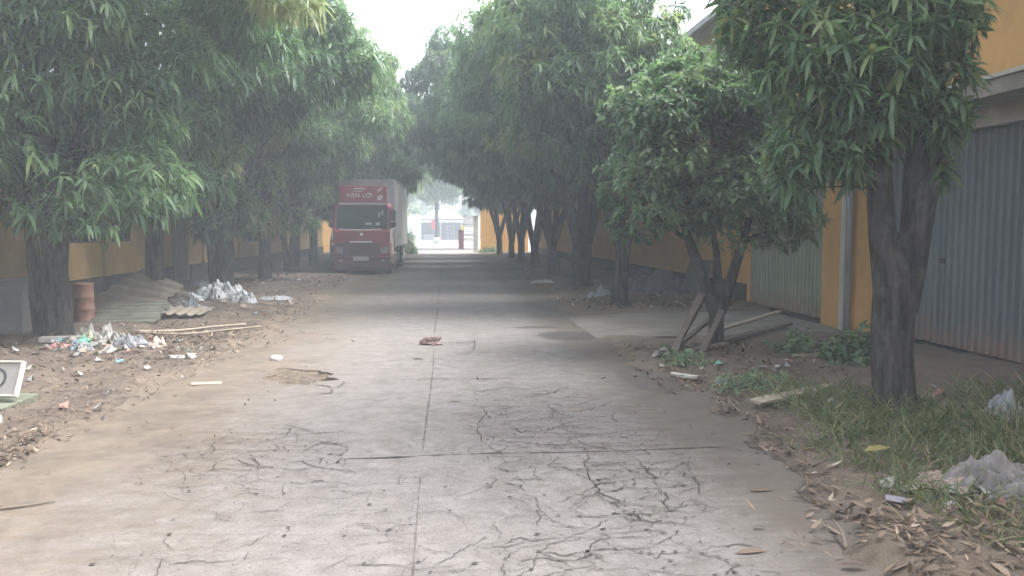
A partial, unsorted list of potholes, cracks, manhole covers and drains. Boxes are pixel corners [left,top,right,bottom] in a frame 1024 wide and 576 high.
crack [123,424,366,501]
crack [464,386,779,576]
crack [89,466,496,576]
pothole [262,368,339,385]
